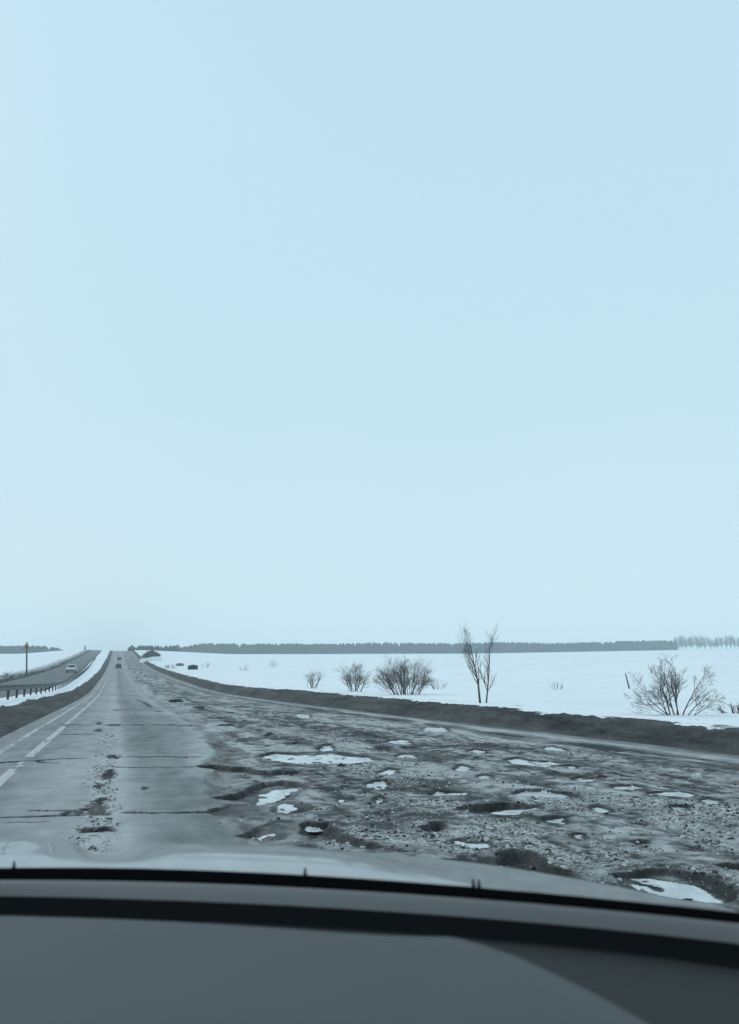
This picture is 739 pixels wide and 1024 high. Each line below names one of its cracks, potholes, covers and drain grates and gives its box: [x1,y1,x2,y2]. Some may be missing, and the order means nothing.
pothole [417,821,449,832]
pothole [454,802,546,815]
pothole [503,757,561,767]
pothole [255,751,386,764]
pothole [83,802,112,816]
pothole [212,780,311,805]
